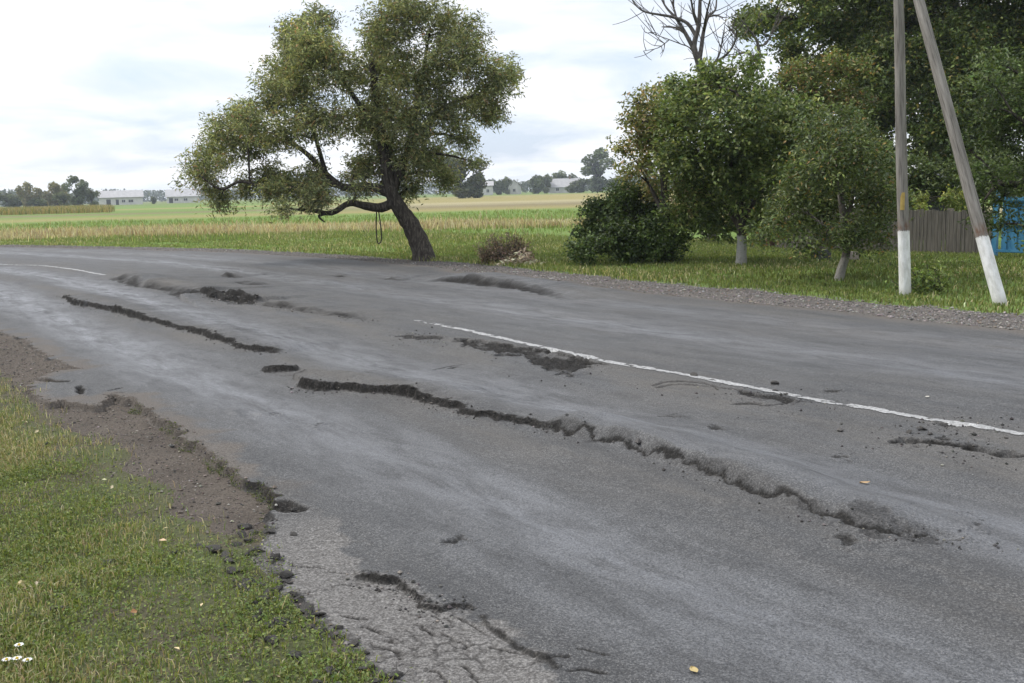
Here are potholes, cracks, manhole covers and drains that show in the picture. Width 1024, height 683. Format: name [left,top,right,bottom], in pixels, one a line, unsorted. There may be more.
crack [61,272,968,683]
pothole [271,498,312,513]
pothole [451,338,610,377]
